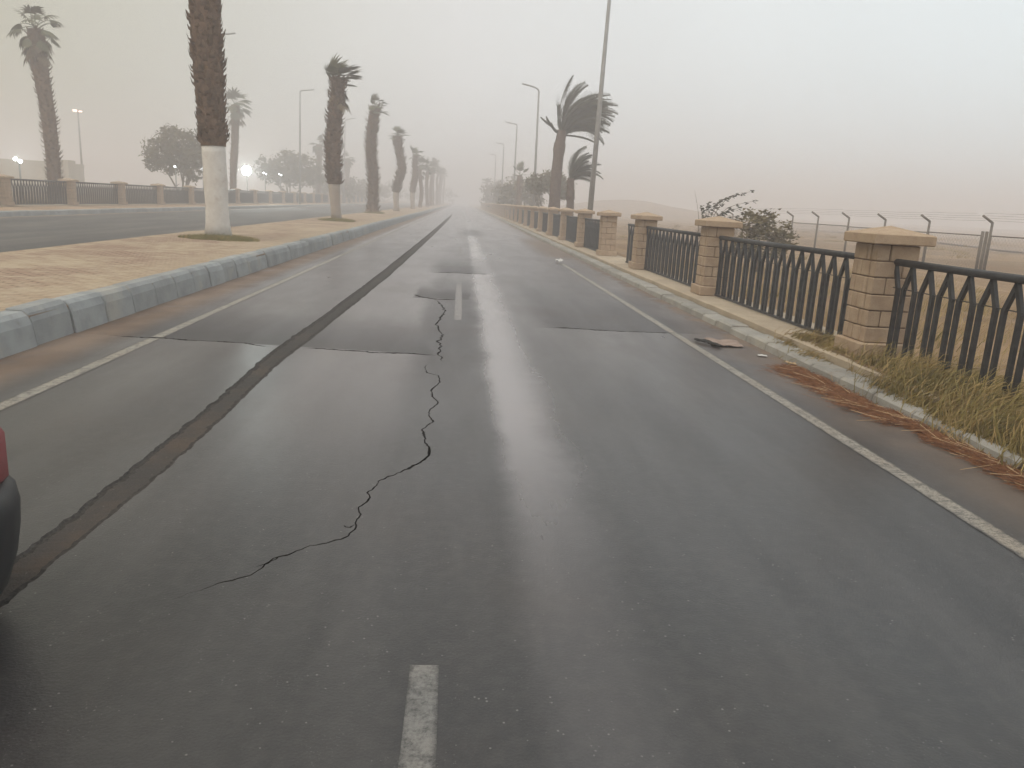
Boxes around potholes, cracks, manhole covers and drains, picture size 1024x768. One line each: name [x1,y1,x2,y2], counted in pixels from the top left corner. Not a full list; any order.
crack [180,295,455,597]
